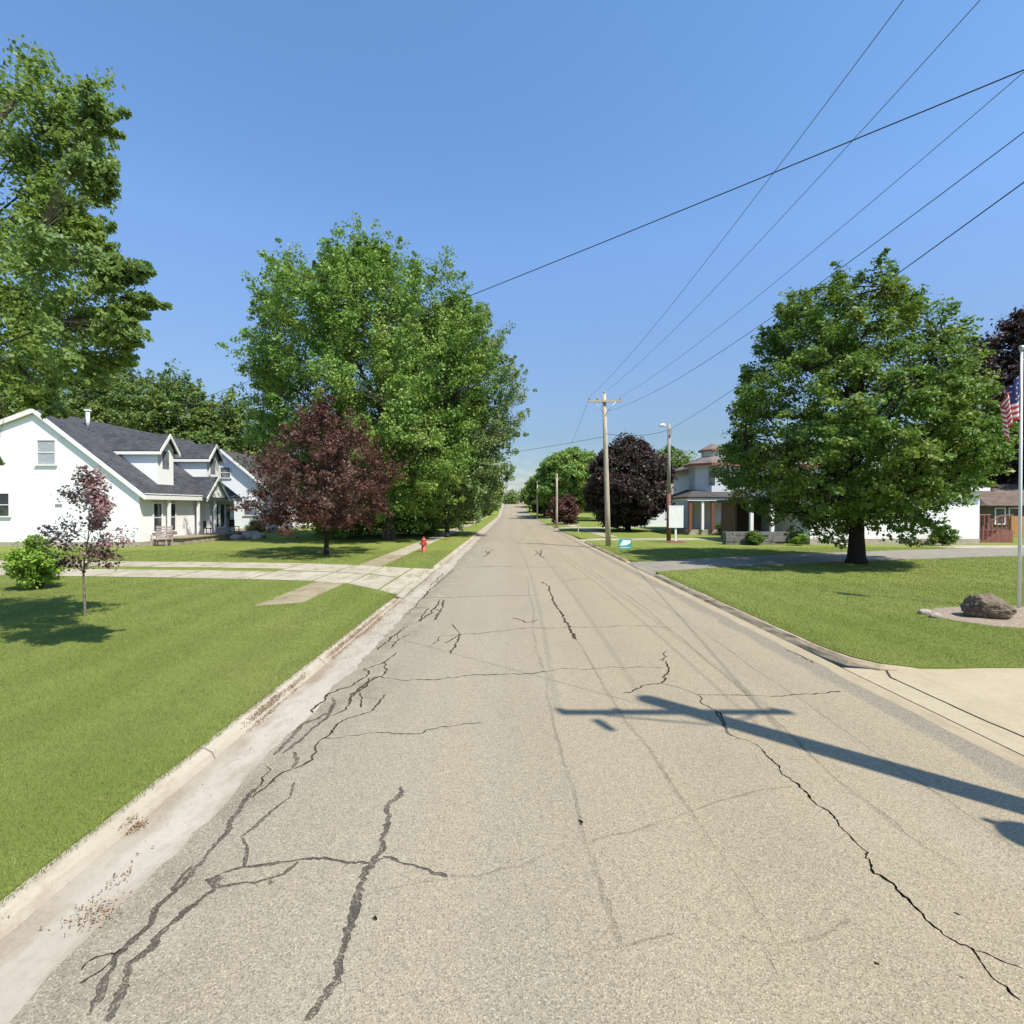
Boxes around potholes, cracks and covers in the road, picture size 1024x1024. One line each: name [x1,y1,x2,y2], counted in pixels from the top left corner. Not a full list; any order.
crack [80,570,1023,1016]
